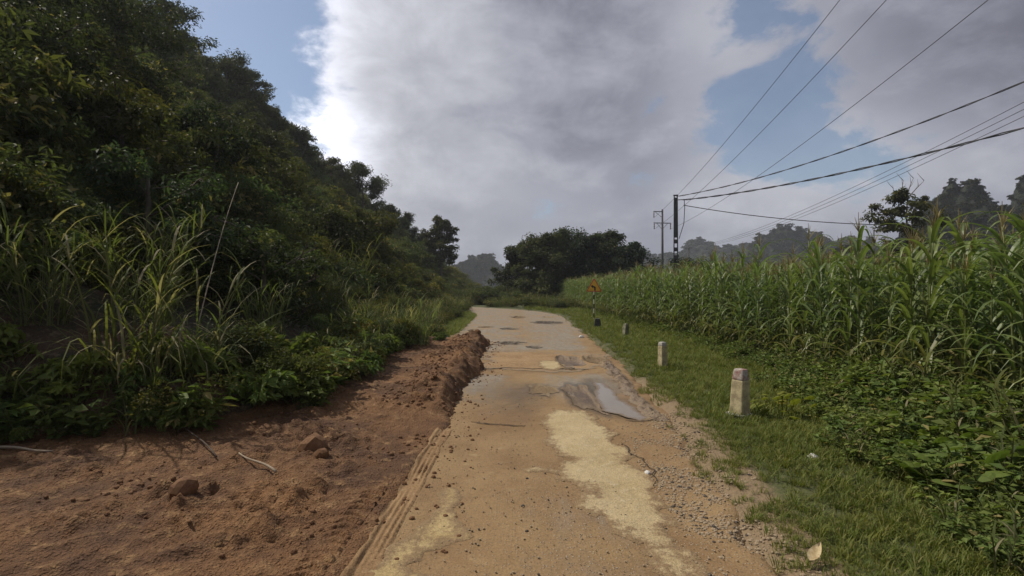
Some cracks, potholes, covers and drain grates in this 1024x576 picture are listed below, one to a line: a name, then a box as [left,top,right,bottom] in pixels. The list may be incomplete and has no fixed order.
pothole [561,384,608,415]
pothole [555,355,587,368]
